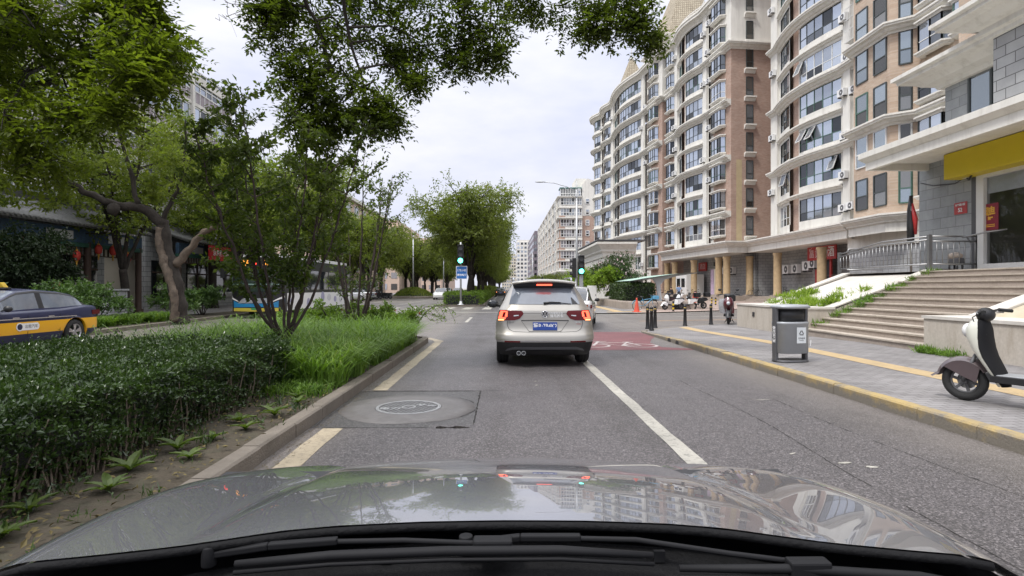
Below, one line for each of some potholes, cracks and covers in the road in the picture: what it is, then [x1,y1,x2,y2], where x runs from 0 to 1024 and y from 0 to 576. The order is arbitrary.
manhole cover [338,395,475,424]
